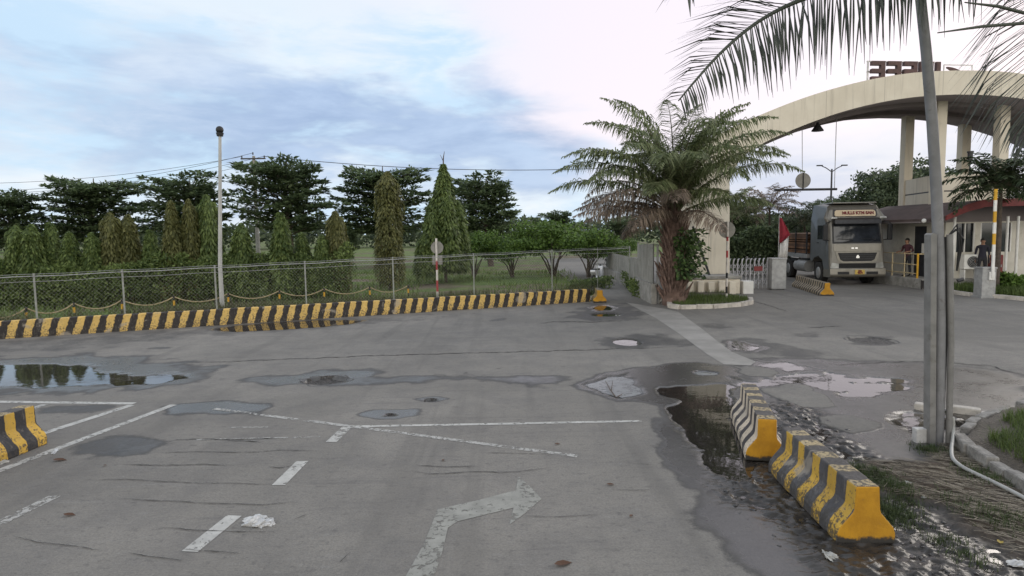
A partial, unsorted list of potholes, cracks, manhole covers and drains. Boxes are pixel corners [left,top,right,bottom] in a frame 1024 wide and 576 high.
pothole [843,335,900,346]
crack [133,548,234,560]
crack [123,498,306,519]
crack [103,438,313,484]
pothole [299,375,354,386]
